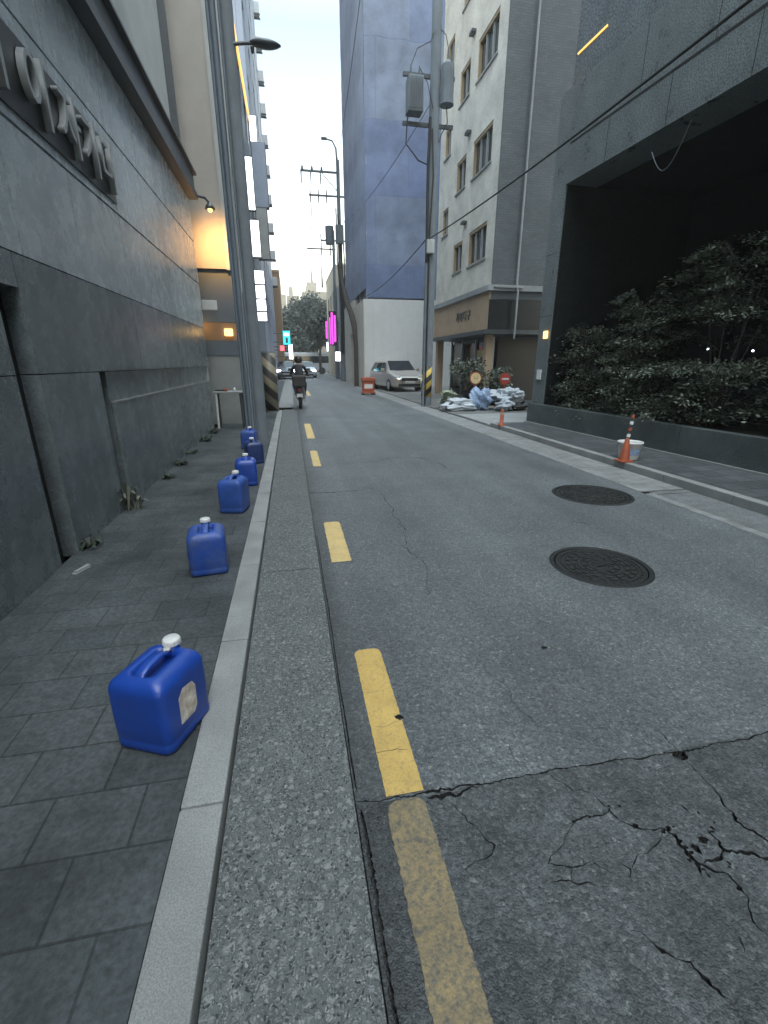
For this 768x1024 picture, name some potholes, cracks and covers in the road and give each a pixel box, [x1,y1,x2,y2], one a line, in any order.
crack [314,488,430,597]
manhole cover [549,547,655,588]
crack [548,723,768,1000]
manhole cover [552,485,635,506]
